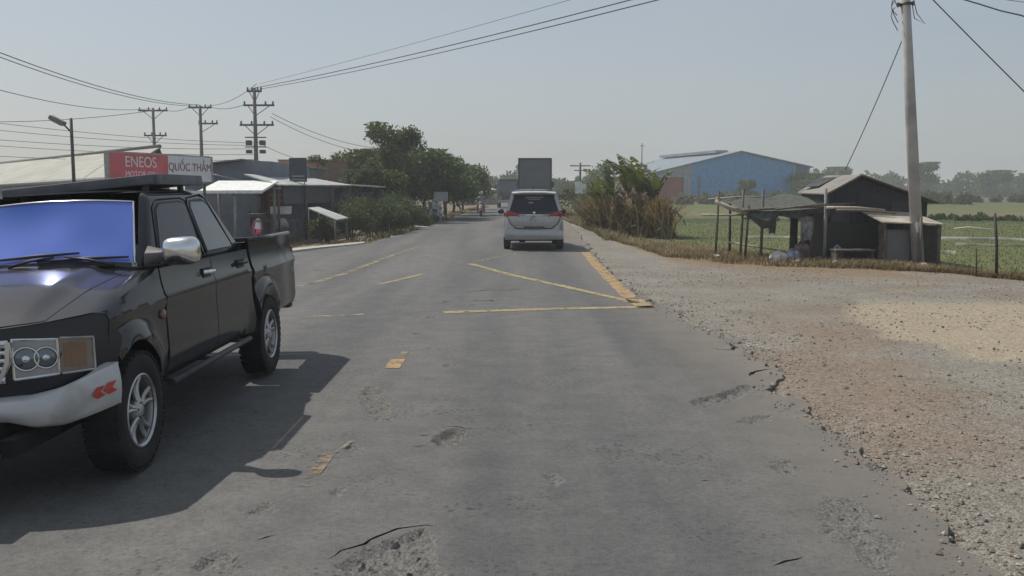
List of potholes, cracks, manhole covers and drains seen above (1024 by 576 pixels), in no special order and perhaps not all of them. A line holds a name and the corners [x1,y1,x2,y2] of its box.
pothole [542,472,567,487]
pothole [689,384,758,408]
pothole [243,502,279,518]
pothole [412,426,471,447]
pothole [330,525,450,576]
pothole [188,549,253,576]
